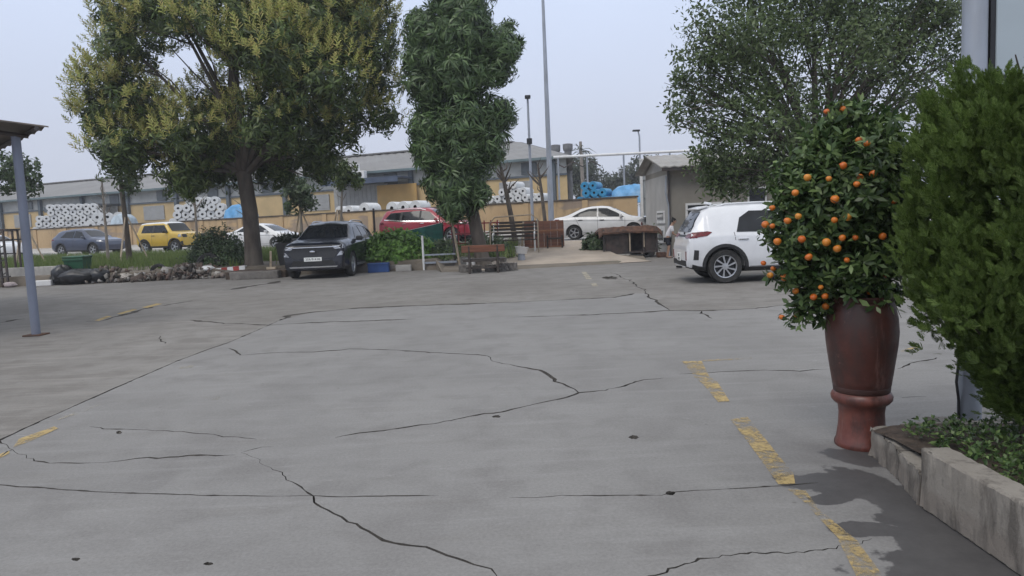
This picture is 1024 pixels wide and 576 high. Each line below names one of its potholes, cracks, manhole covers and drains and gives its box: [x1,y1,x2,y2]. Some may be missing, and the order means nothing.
crack [648,539,870,576]
crack [193,273,781,326]
crack [90,426,497,576]
crack [229,348,819,438]
crack [0,440,225,464]
